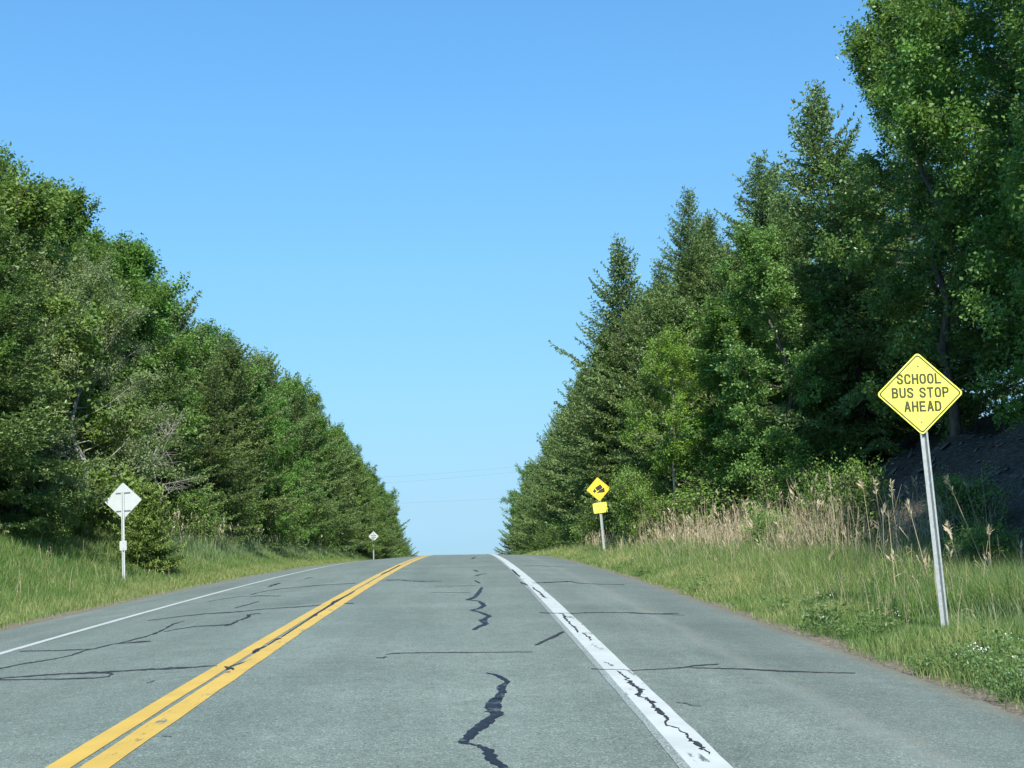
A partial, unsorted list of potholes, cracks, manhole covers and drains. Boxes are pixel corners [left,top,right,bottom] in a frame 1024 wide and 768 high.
crack [512,565,852,754]
crack [0,577,354,683]
